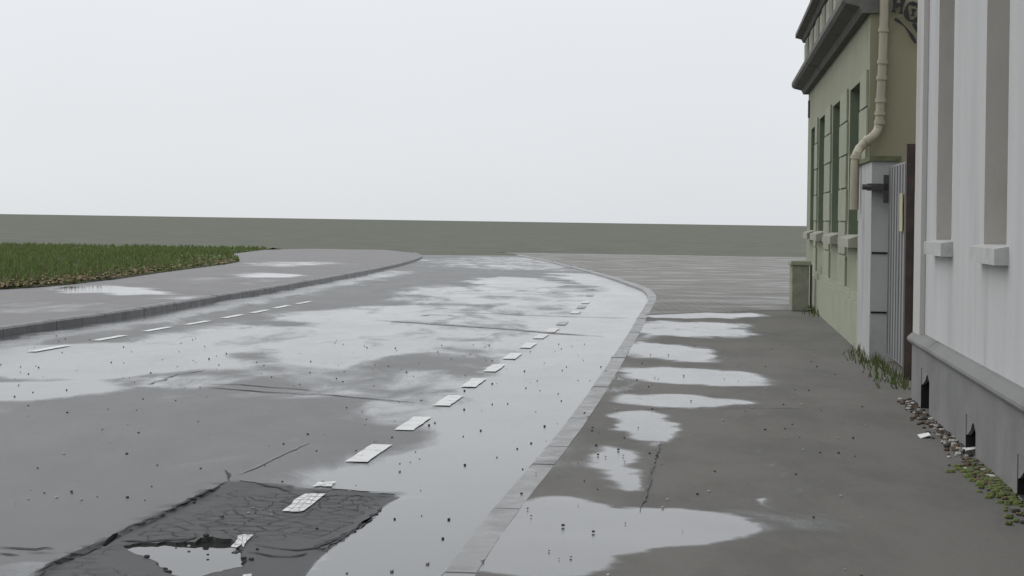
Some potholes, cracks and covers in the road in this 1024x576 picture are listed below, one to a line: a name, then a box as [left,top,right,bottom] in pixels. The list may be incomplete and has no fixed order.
crack [2,470,405,576]
pothole [124,533,254,576]
crack [149,369,415,403]
